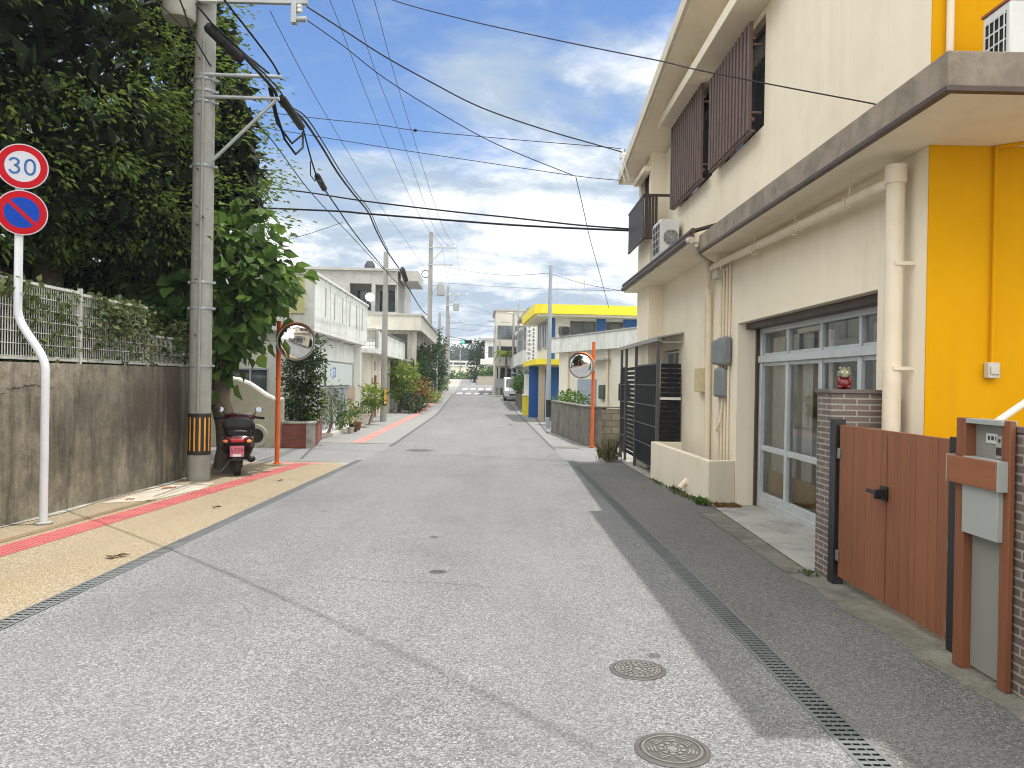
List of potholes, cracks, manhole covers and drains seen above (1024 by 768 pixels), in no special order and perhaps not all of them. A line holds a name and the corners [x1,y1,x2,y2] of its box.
drain grate [568,460,898,768]
manhole cover [609,659,667,681]
manhole cover [634,733,711,768]
